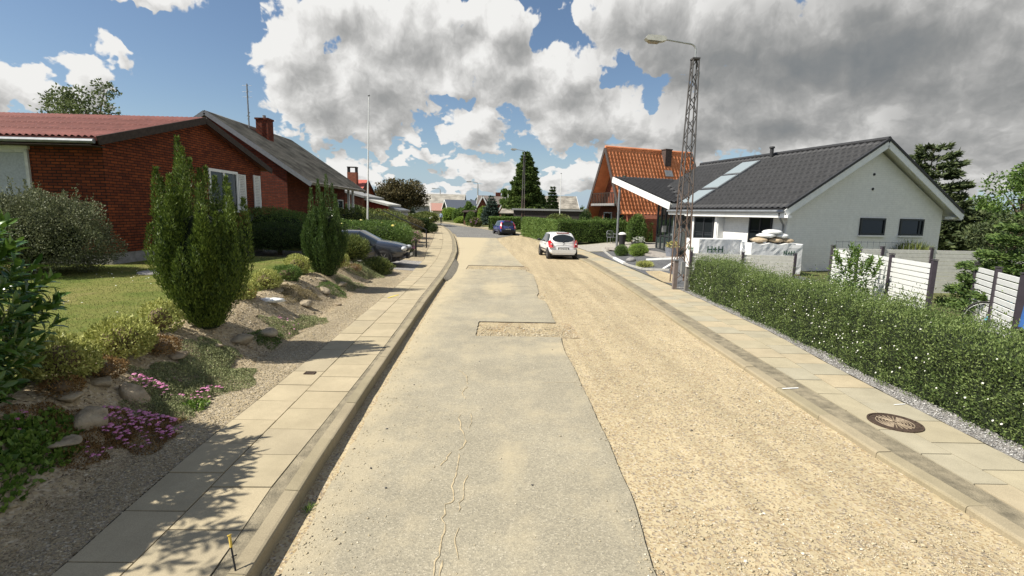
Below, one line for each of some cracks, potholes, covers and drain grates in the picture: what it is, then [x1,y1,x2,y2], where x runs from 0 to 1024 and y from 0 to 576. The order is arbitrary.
manhole cover [866,413,925,433]
crack [433,370,472,576]
